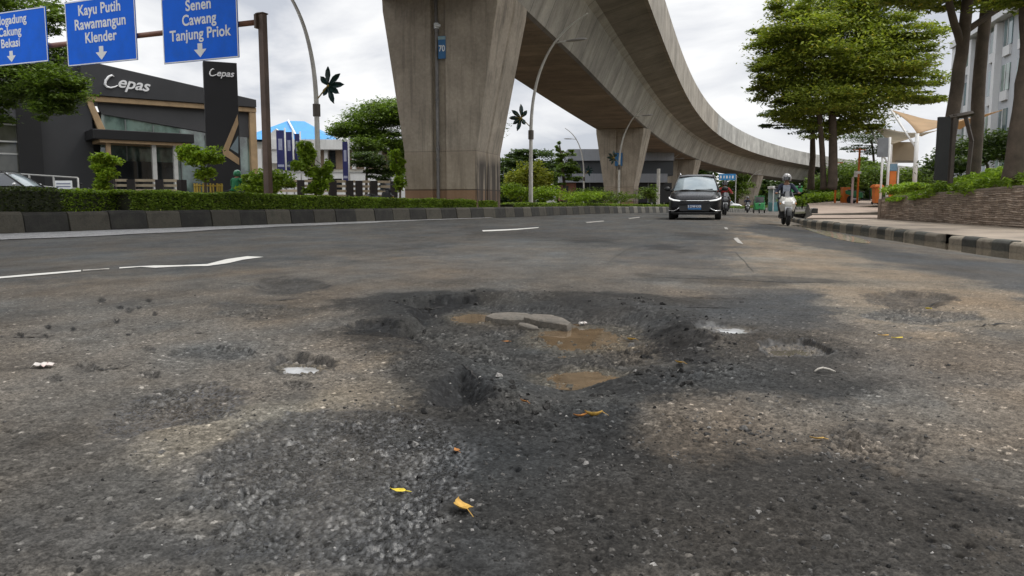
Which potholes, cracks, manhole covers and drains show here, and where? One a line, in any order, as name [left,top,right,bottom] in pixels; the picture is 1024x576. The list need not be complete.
pothole [269,351,339,376]
pothole [343,317,402,334]
pothole [861,307,991,325]
crack [653,255,779,282]
pothole [859,290,960,313]
pothole [250,276,334,295]
pothole [758,337,837,357]
pothole [163,345,257,361]
pothole [387,291,728,419]
